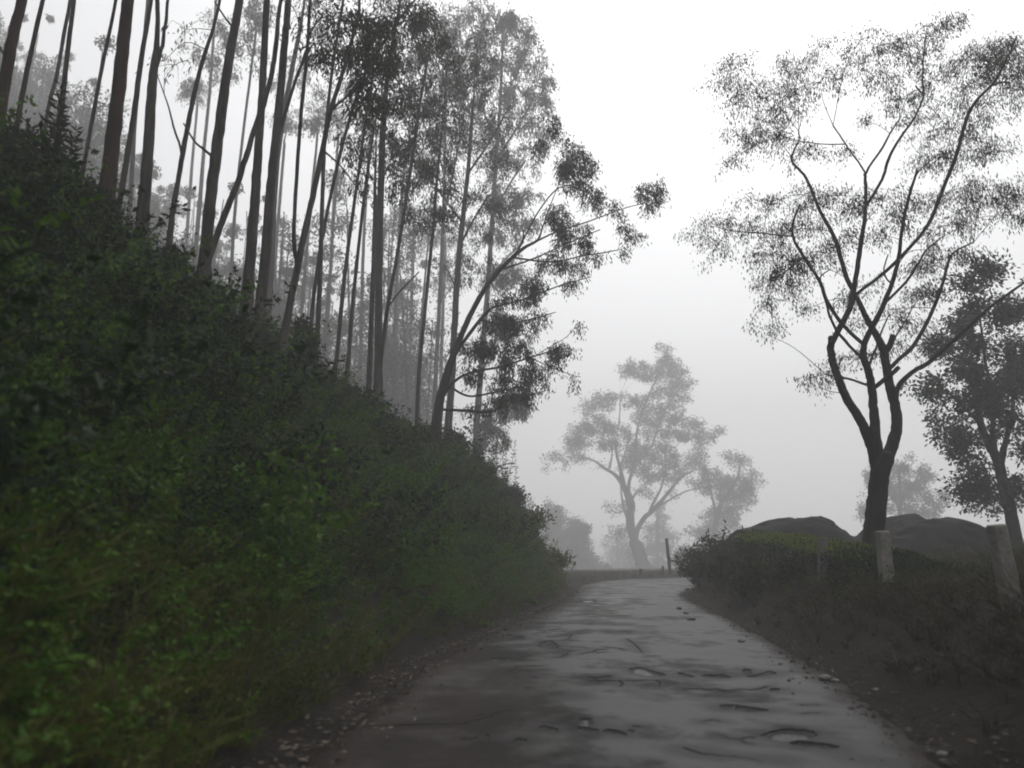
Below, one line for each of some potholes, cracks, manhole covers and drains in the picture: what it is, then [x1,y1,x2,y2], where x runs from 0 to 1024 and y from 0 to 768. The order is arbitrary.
pothole [790,740,840,749]
pothole [629,667,666,676]
pothole [760,729,818,743]
pothole [577,718,594,728]
crack [511,635,643,688]
